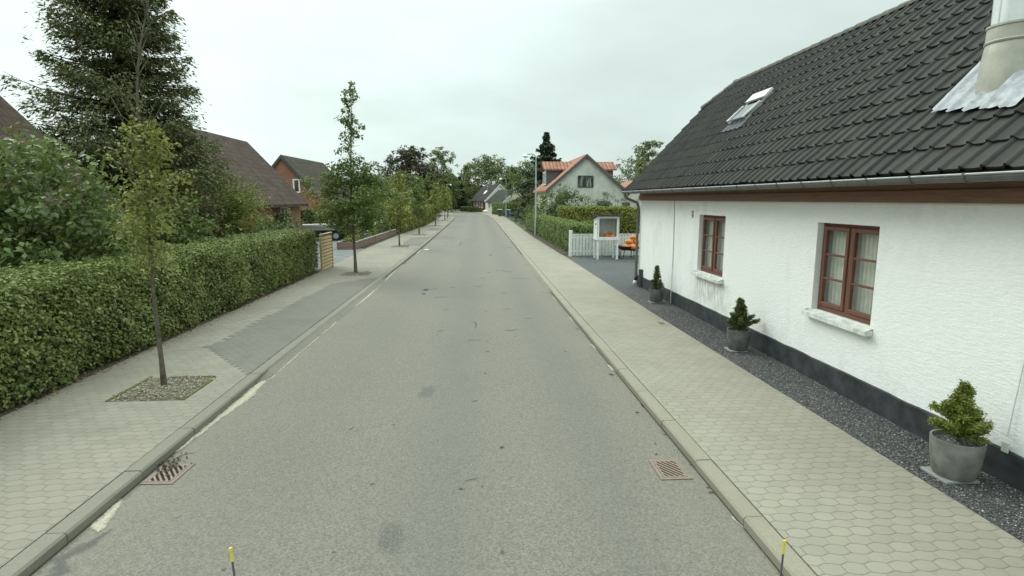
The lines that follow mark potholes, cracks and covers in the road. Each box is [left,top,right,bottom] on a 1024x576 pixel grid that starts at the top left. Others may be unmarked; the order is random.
drain grate [648,459,693,480]
drain grate [139,463,196,485]
